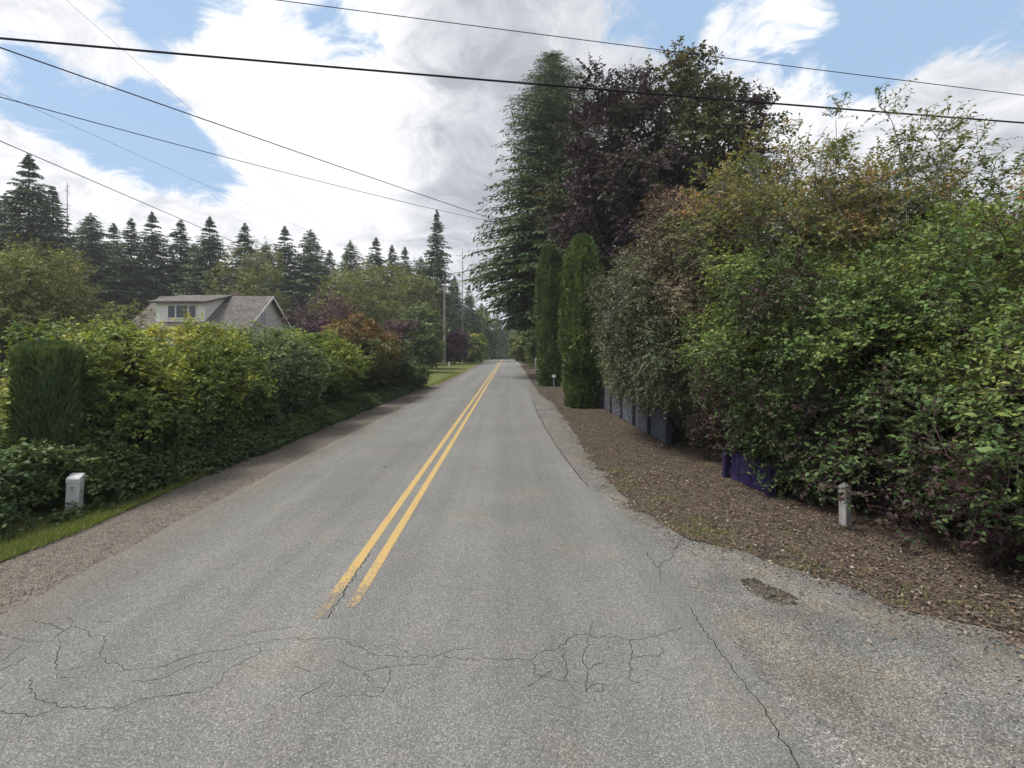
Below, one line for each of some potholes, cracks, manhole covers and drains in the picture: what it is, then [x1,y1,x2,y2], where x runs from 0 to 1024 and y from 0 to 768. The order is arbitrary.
crack [445,607,800,768]
crack [0,618,475,717]
crack [647,537,685,580]
pothole [739,575,803,608]
